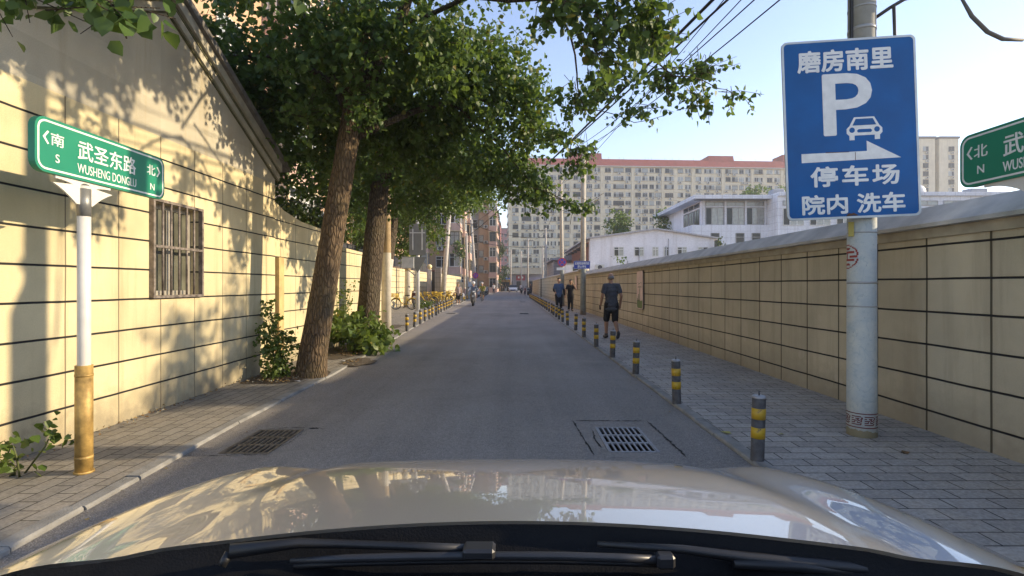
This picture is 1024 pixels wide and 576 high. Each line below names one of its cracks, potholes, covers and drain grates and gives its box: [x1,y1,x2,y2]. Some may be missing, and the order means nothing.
drain grate [595,427,660,452]
drain grate [218,429,304,454]
